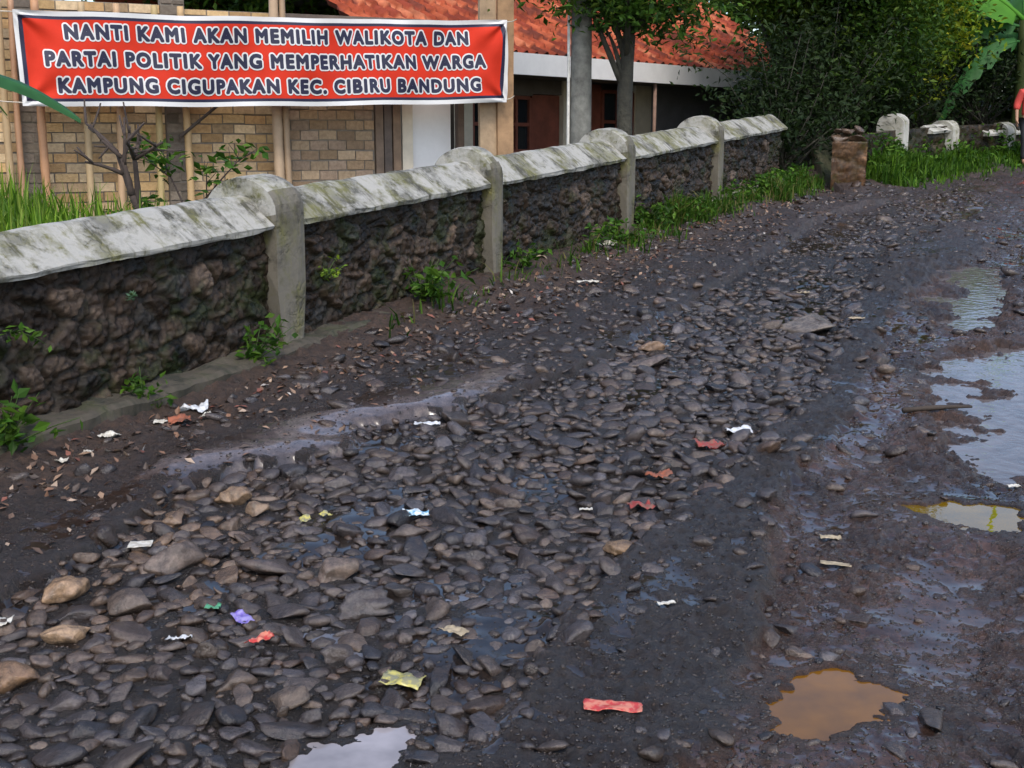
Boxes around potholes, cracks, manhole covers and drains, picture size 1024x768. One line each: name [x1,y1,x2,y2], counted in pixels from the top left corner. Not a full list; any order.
pothole [880,253,1024,336]
pothole [273,709,434,768]
pothole [750,658,927,751]
pothole [884,496,1024,537]
pothole [868,331,1024,494]
